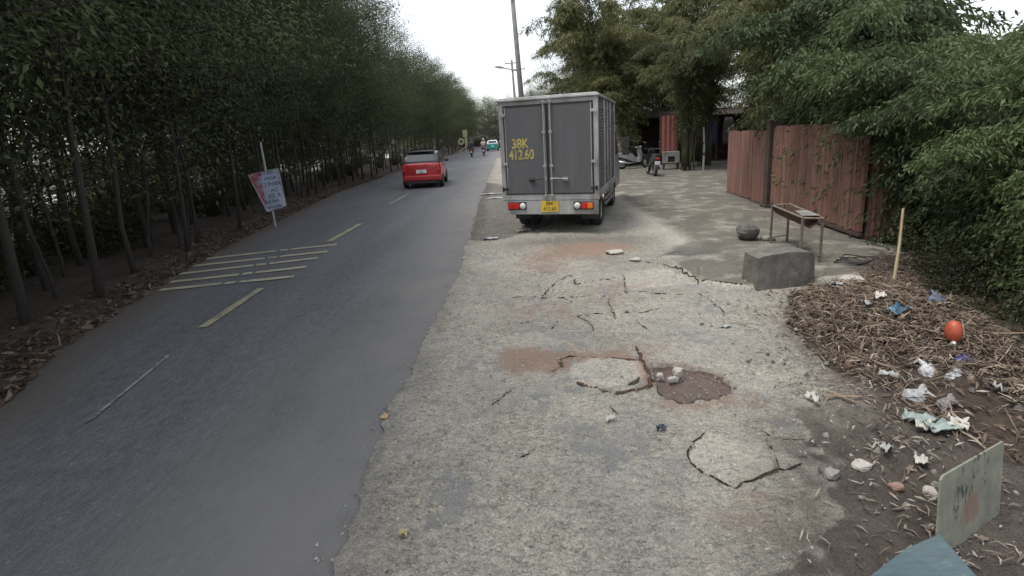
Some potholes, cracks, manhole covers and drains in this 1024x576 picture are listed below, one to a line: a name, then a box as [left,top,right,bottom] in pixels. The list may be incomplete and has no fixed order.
crack [687,425,811,489]
pothole [648,361,736,404]
crack [520,262,742,414]
